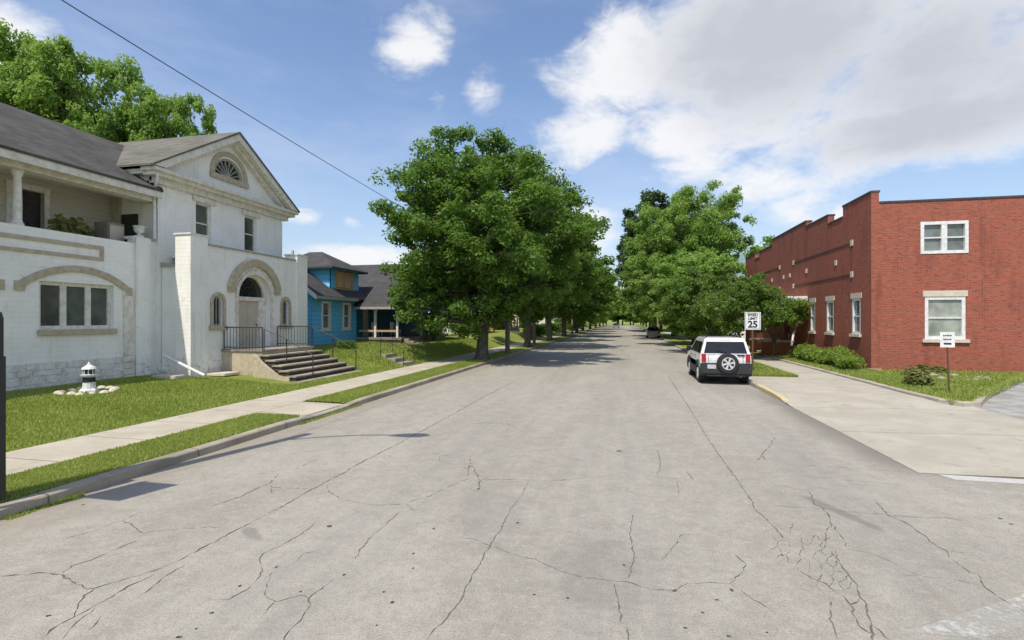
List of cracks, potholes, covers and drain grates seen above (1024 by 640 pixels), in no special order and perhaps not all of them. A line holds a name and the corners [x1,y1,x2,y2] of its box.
crack [668,376,1024,640]
crack [7,381,771,640]
